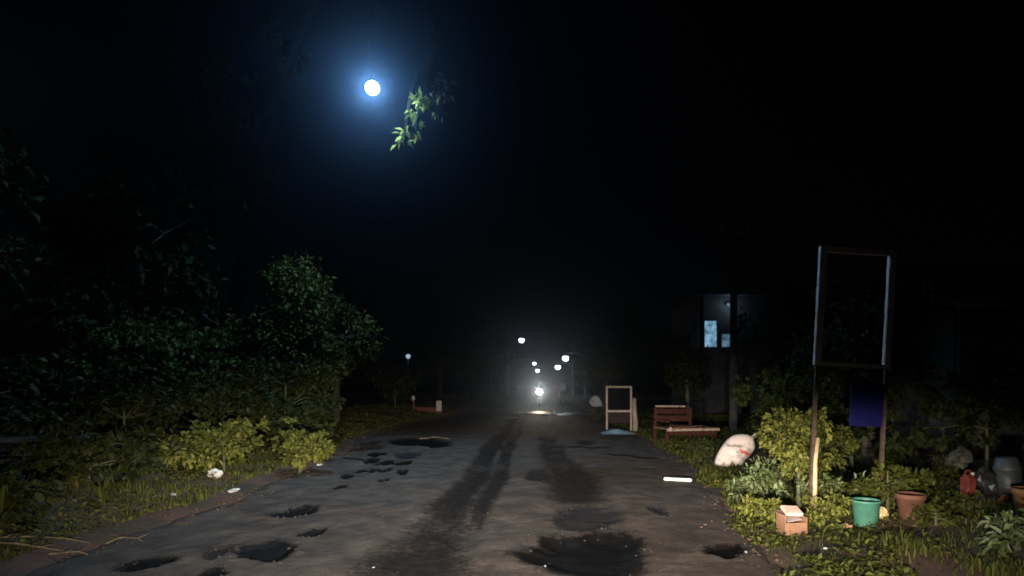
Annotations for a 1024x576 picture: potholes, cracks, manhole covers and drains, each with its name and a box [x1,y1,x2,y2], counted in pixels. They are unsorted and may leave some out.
pothole [114,556,179,571]
pothole [388,438,452,448]
pothole [202,546,234,560]
pothole [704,544,748,558]
pothole [268,505,320,517]
pothole [647,507,668,516]
pothole [549,508,624,531]
pothole [396,451,420,459]
pothole [507,531,648,576]
pothole [298,529,327,537]
pothole [231,539,297,561]
